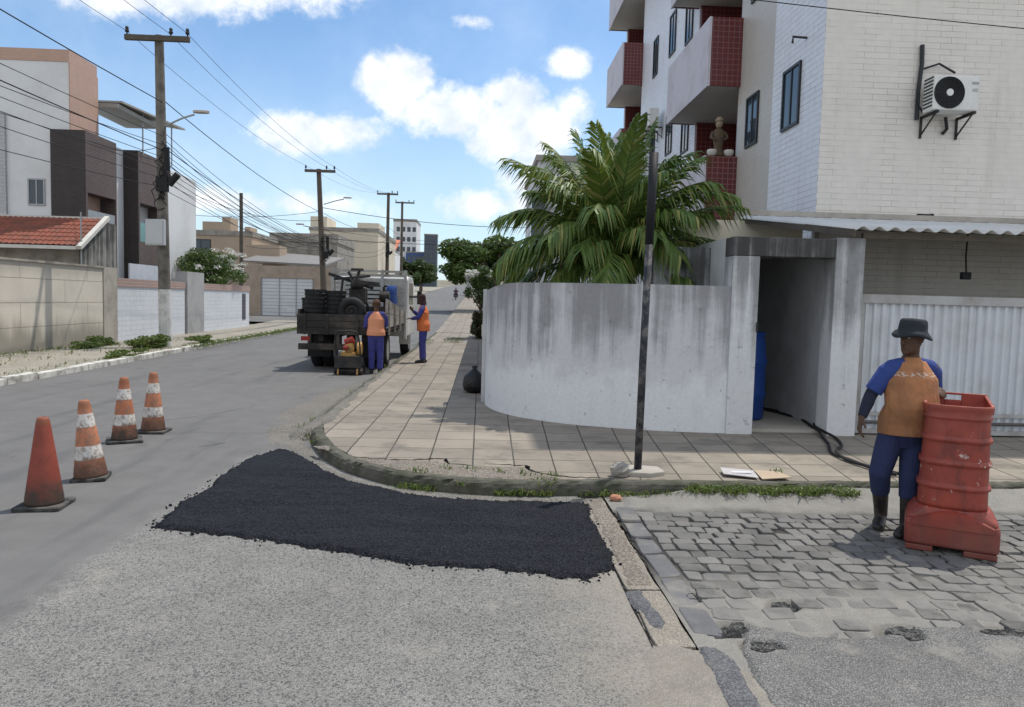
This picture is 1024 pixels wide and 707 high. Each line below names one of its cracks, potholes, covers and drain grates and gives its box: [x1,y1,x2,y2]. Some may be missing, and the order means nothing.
pothole [719,626,739,639]
pothole [884,626,926,641]
pothole [726,622,748,638]
pothole [980,629,1024,637]
pothole [771,601,796,612]
pothole [750,641,787,653]
